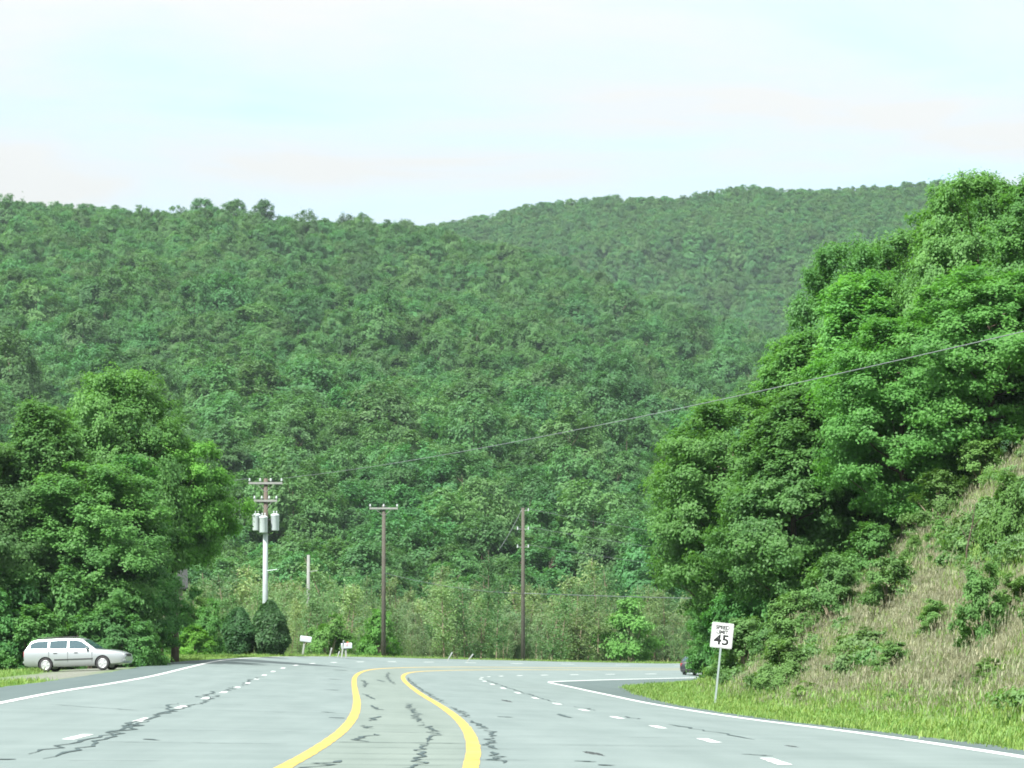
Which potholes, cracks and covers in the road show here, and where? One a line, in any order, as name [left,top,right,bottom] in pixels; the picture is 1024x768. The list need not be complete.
crack [28,670,507,768]
